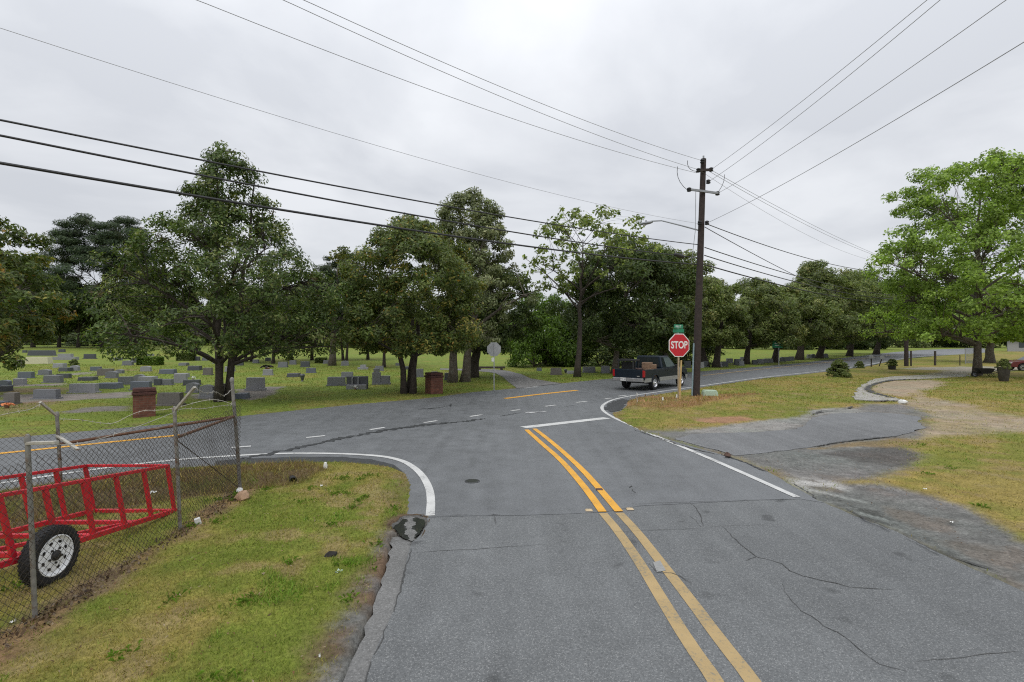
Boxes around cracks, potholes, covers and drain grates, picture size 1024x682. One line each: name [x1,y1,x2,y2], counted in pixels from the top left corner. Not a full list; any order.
crack [642,505,905,671]
pothole [391,515,428,542]
